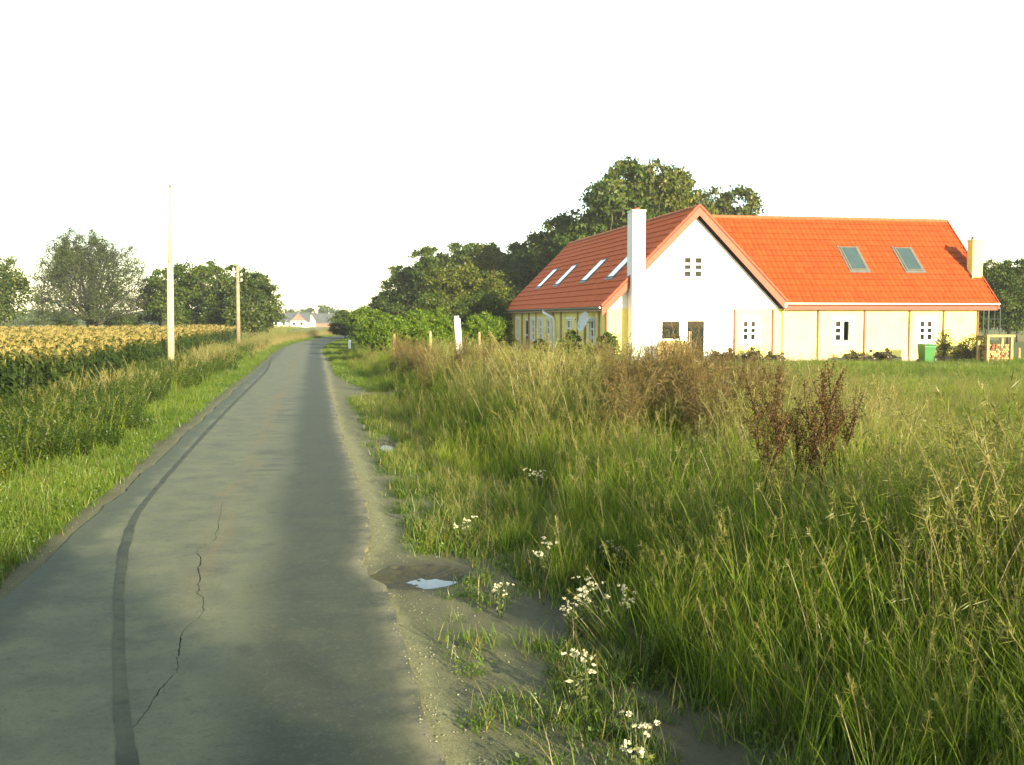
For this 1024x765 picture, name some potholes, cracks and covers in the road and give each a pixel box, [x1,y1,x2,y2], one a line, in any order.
crack [132,504,222,728]
pothole [370,564,473,591]
